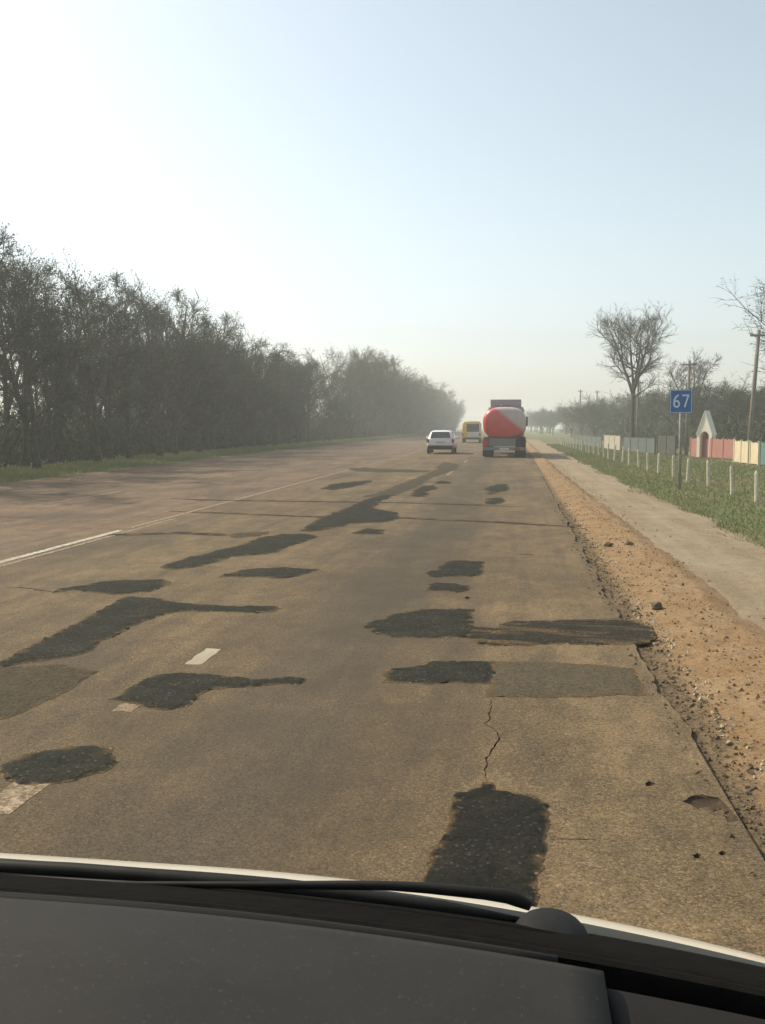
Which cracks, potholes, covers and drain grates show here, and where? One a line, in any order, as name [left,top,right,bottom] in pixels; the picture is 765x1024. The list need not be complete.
pothole [682,794,740,822]
crack [484,700,501,782]
